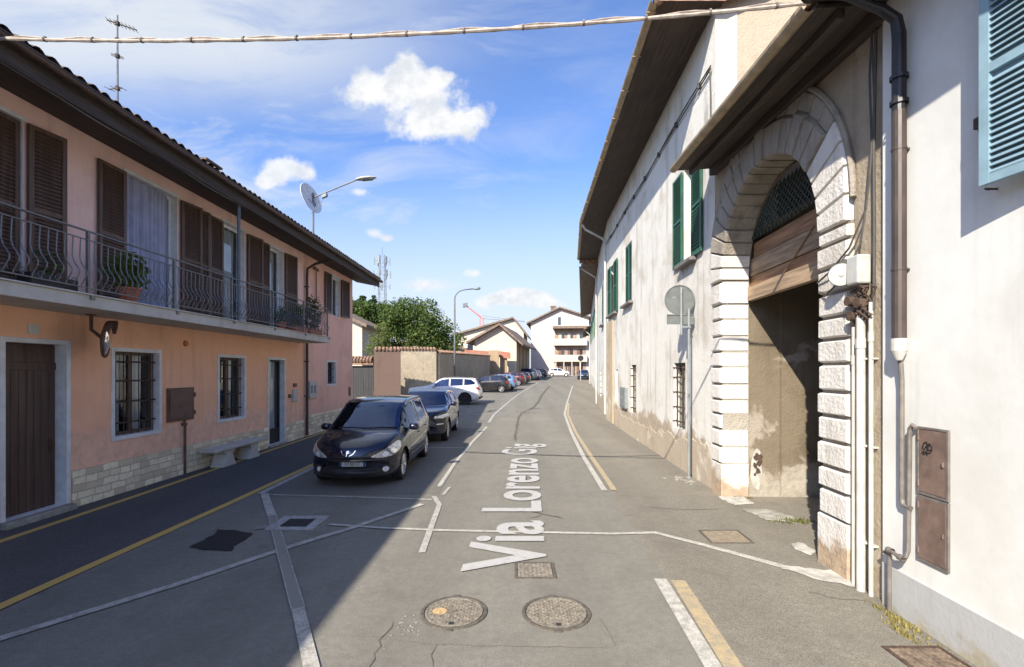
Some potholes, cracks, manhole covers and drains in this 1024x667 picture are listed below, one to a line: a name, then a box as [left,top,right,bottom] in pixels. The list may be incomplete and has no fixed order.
crack [362,615,616,667]
utility cover [881,646,972,667]
drain grate [264,516,330,530]
utility cover [698,530,755,544]
manhole cover [420,595,487,632]
manhole cover [522,595,591,633]
